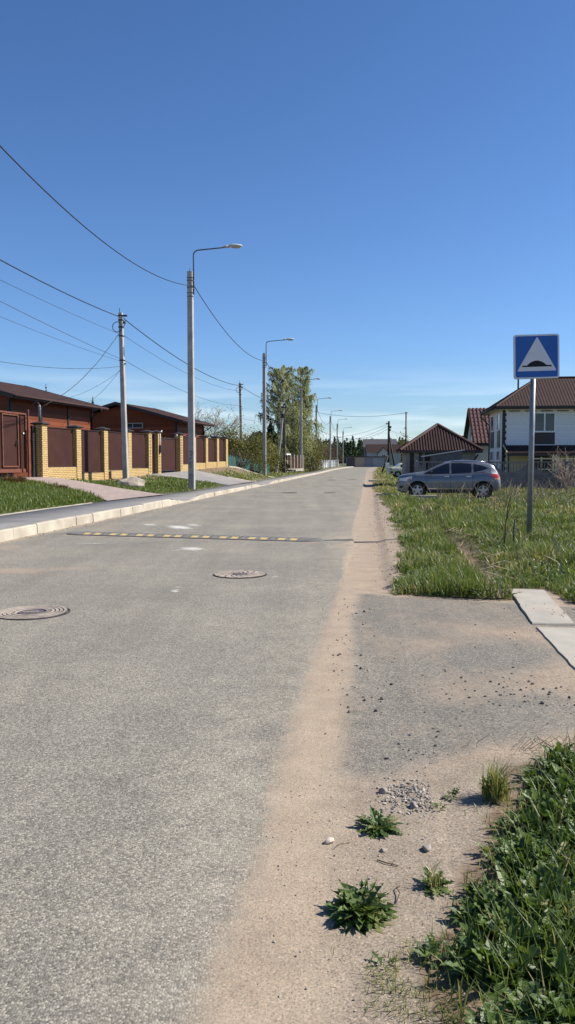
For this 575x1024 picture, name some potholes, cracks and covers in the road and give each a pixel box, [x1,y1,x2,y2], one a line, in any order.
manhole cover [0,605,71,620]
manhole cover [213,570,267,579]
